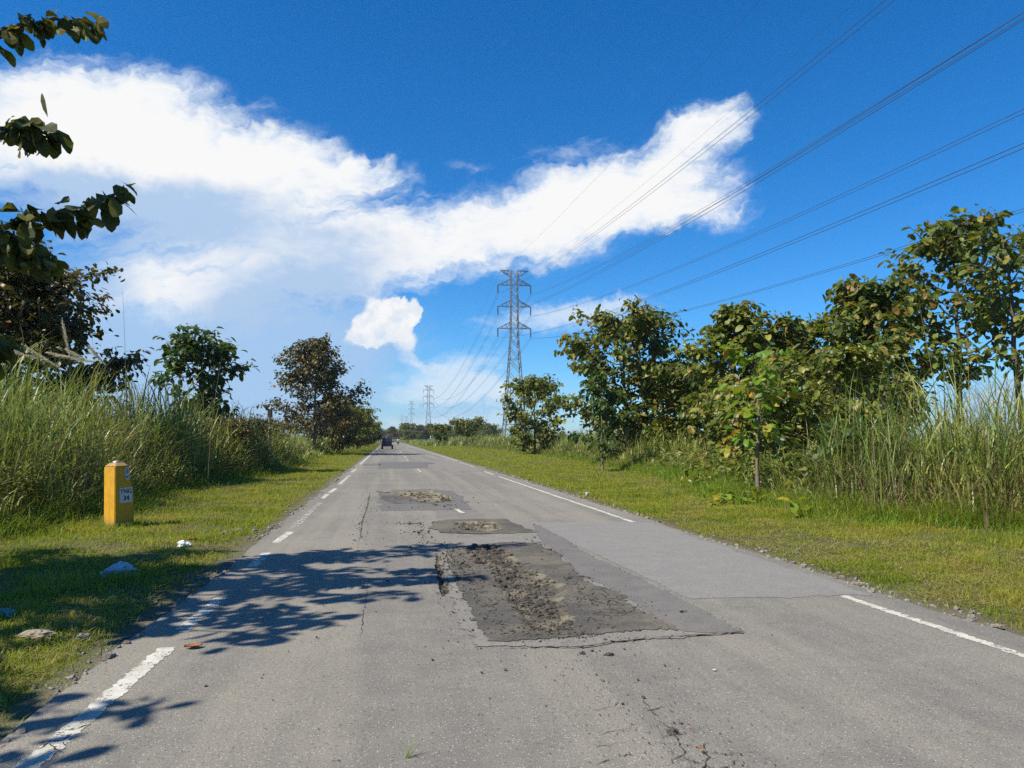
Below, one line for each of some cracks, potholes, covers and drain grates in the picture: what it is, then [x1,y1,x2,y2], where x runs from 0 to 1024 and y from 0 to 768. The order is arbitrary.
pothole [453,521,504,532]
crack [596,701,749,768]
pothole [388,490,455,502]
pothole [463,543,577,632]
pothole [434,555,449,596]
